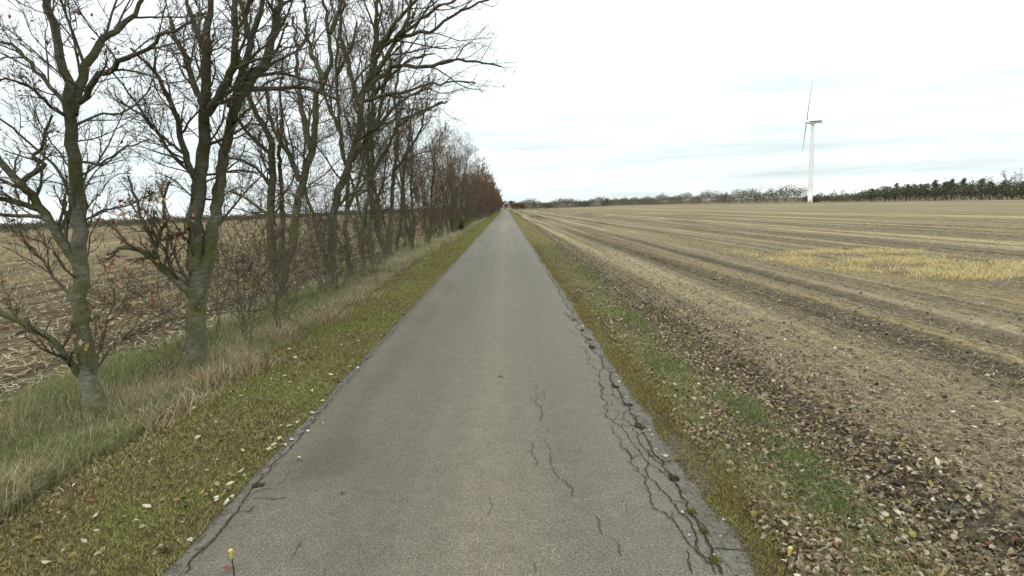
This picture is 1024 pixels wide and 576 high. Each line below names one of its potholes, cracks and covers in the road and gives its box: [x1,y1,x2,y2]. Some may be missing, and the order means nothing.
crack [542,264,746,575]
crack [524,369,574,496]
crack [234,470,289,515]
